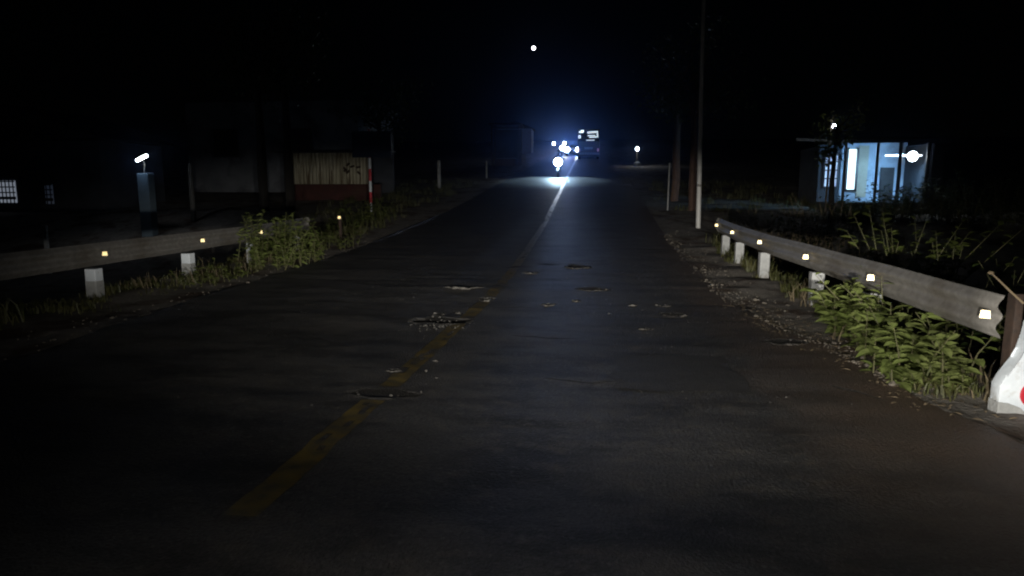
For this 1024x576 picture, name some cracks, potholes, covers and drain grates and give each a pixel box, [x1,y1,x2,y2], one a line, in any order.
pothole [398,316,473,332]
pothole [343,388,425,400]
